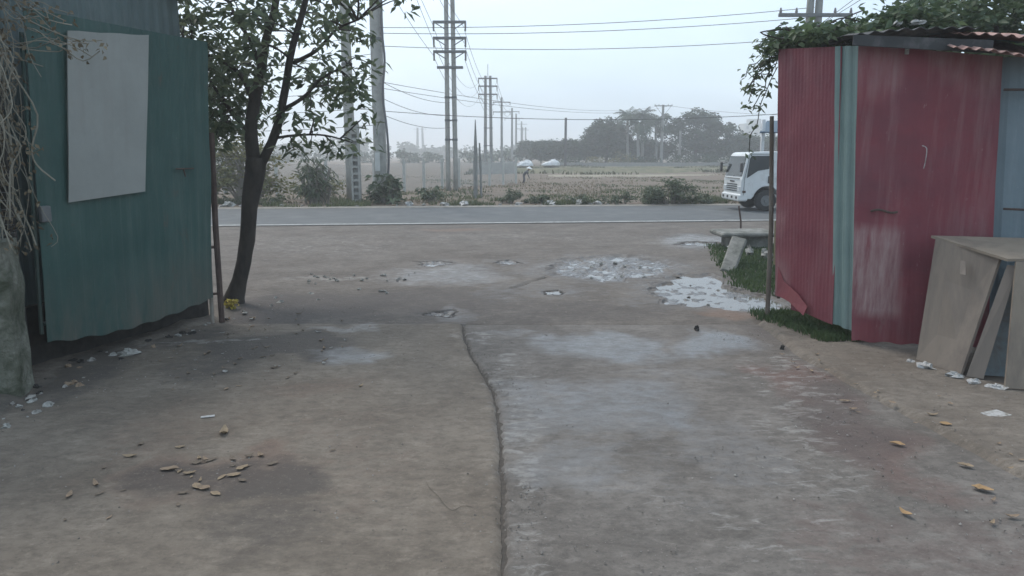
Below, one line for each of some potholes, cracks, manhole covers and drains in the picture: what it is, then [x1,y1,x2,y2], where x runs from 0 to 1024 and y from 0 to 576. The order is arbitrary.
pothole [644,272,791,313]
pothole [541,254,682,283]
pothole [422,310,457,318]
crack [427,326,508,576]
